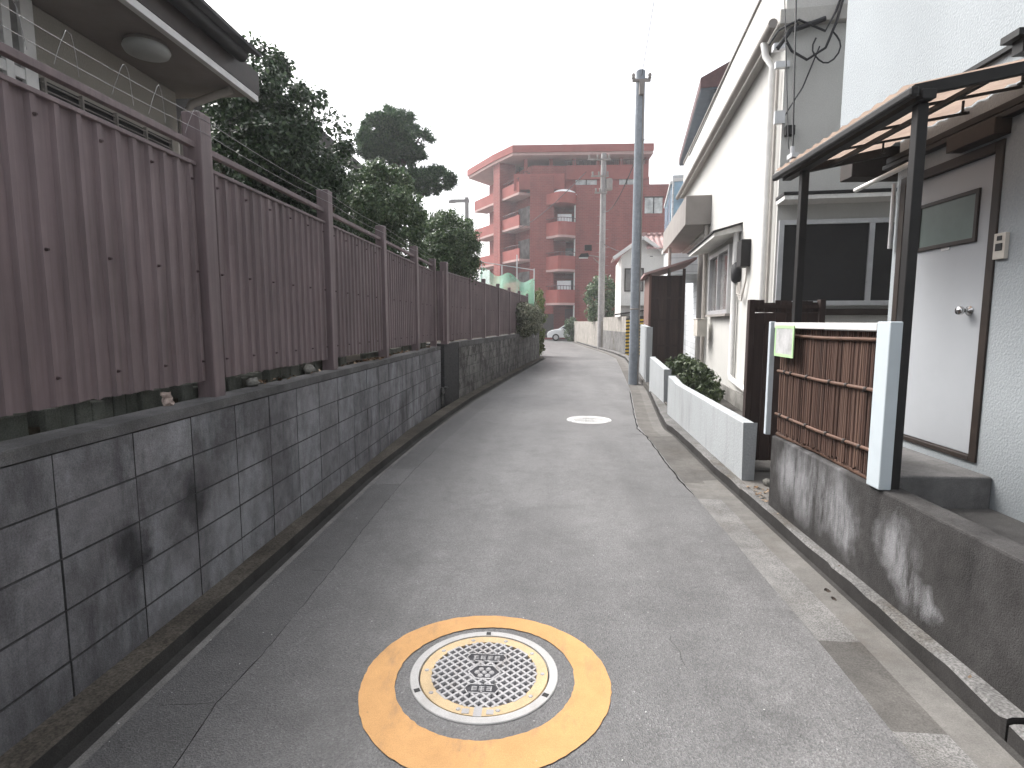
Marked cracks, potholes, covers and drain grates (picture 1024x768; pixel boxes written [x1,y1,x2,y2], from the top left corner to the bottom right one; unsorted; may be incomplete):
crack [630,393,695,497]
manhole cover [410,632,558,725]
manhole cover [567,416,611,424]
